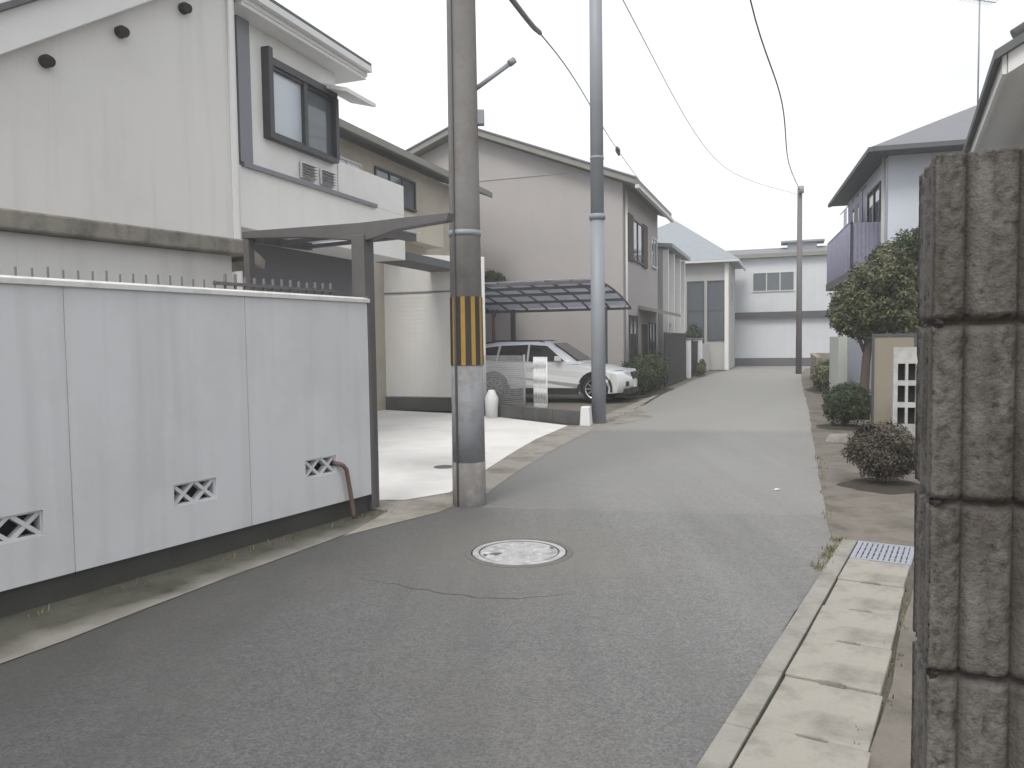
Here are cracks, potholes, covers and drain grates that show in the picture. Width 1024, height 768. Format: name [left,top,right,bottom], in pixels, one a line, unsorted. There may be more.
manhole cover [465,538,573,568]
drain grate [849,541,914,573]
crack [361,578,569,599]
